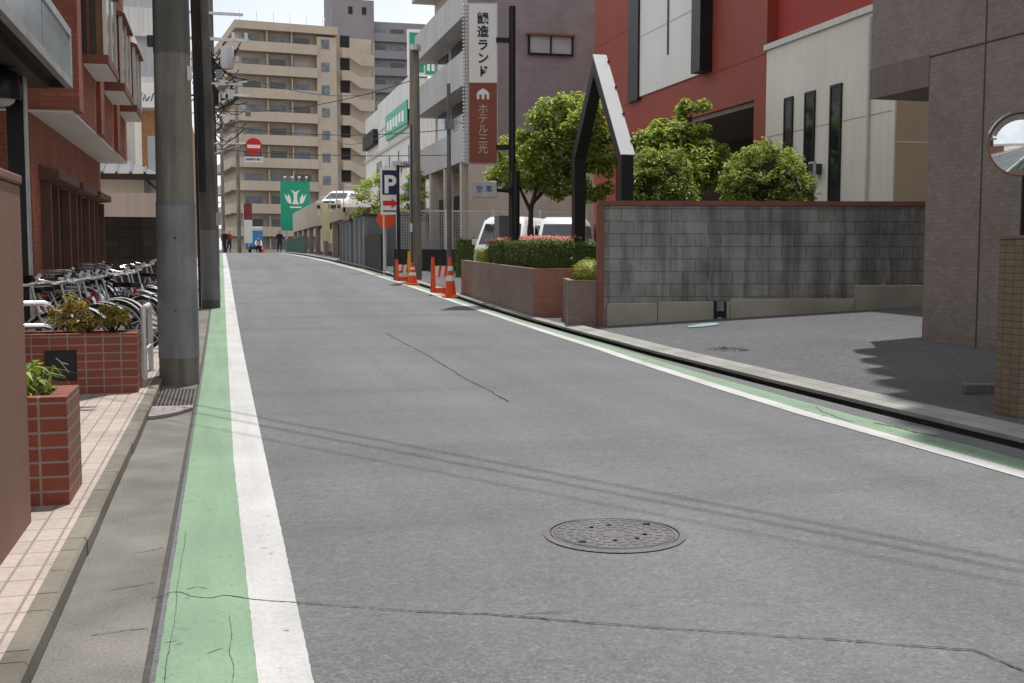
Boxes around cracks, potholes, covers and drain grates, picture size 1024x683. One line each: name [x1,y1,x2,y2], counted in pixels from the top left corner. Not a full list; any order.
manhole cover [543,517,686,553]
crack [154,587,1024,670]
crack [209,616,234,681]
drain grate [148,388,197,420]
crack [387,333,507,401]
